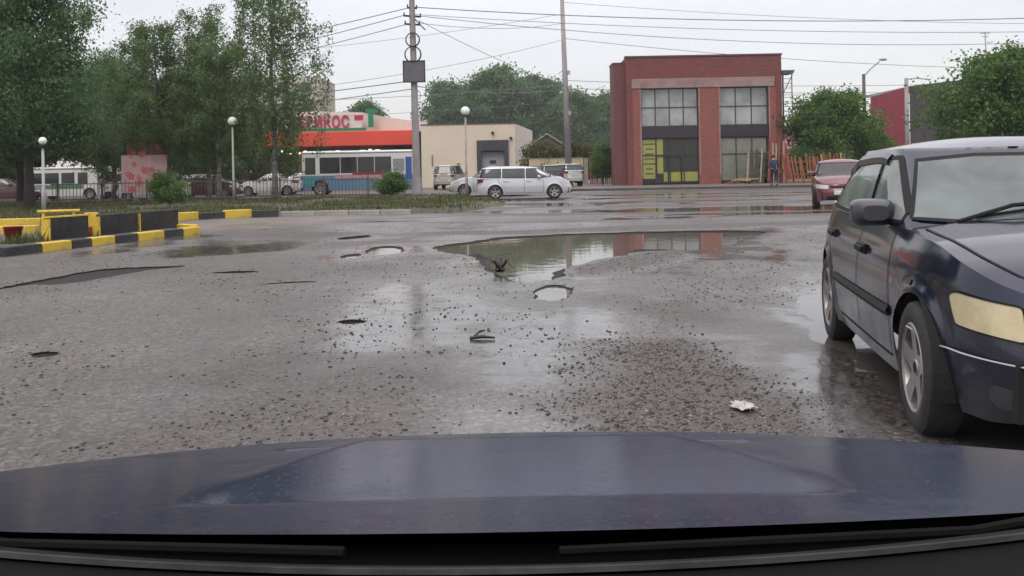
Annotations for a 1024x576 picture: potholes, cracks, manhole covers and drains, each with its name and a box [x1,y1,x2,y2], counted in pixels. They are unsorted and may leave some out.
pothole [365,246,405,255]
pothole [533,285,573,301]
pothole [432,230,766,283]
